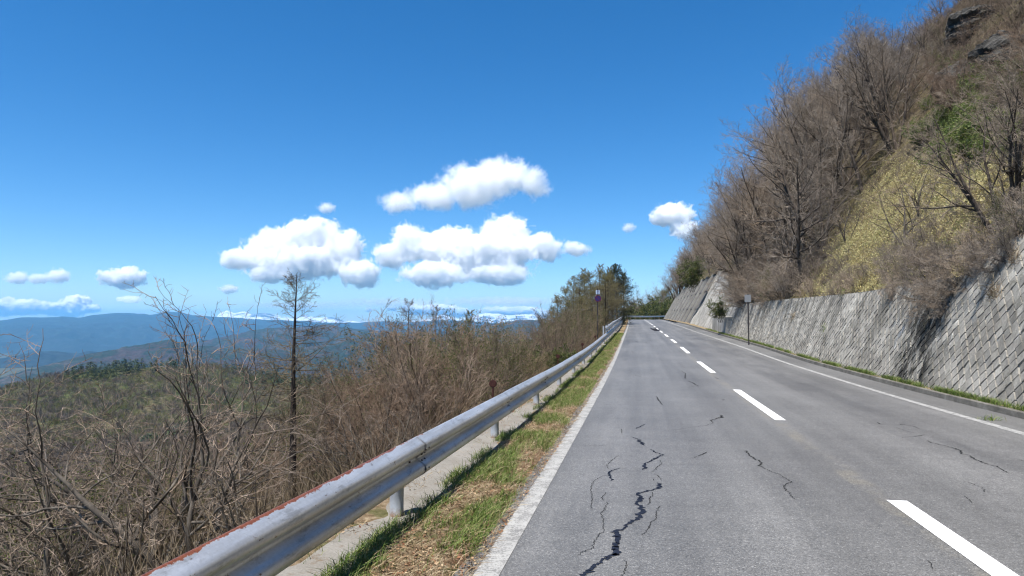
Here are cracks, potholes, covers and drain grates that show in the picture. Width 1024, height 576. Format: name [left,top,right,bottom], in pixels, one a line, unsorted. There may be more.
crack [877,422,1008,473]
crack [746,451,795,499]
crack [578,424,662,576]
